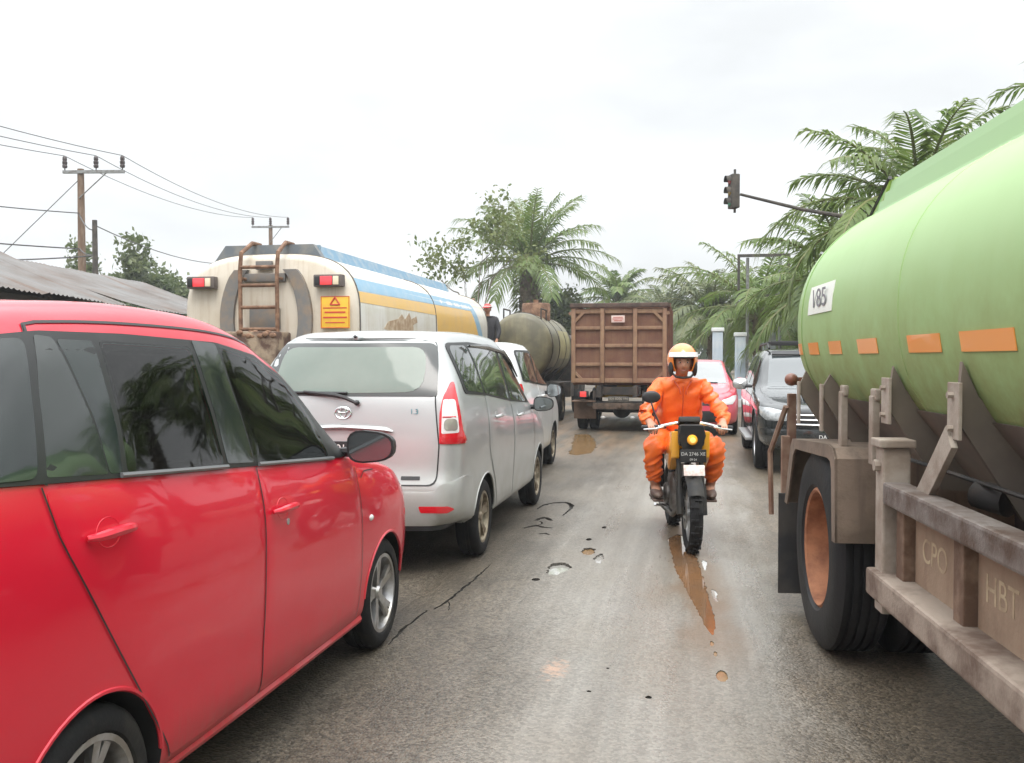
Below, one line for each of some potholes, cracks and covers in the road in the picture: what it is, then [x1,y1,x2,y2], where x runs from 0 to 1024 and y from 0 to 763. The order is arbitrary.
crack [524,502,574,535]
pothole [716,670,728,682]
crack [388,563,492,645]
pothole [546,562,572,575]
